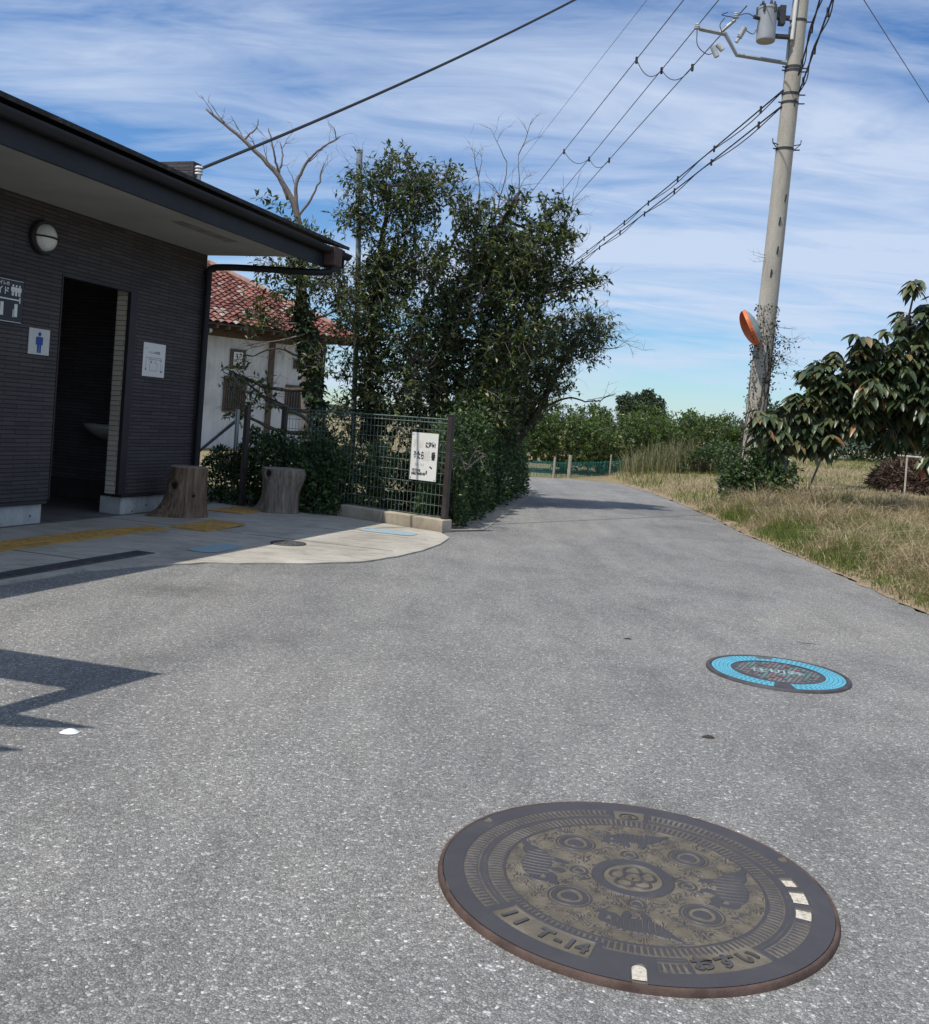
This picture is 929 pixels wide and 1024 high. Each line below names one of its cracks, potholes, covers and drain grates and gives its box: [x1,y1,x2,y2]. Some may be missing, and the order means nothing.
manhole cover [438,801,841,999]
manhole cover [706,655,852,694]
drain grate [0,550,155,580]
